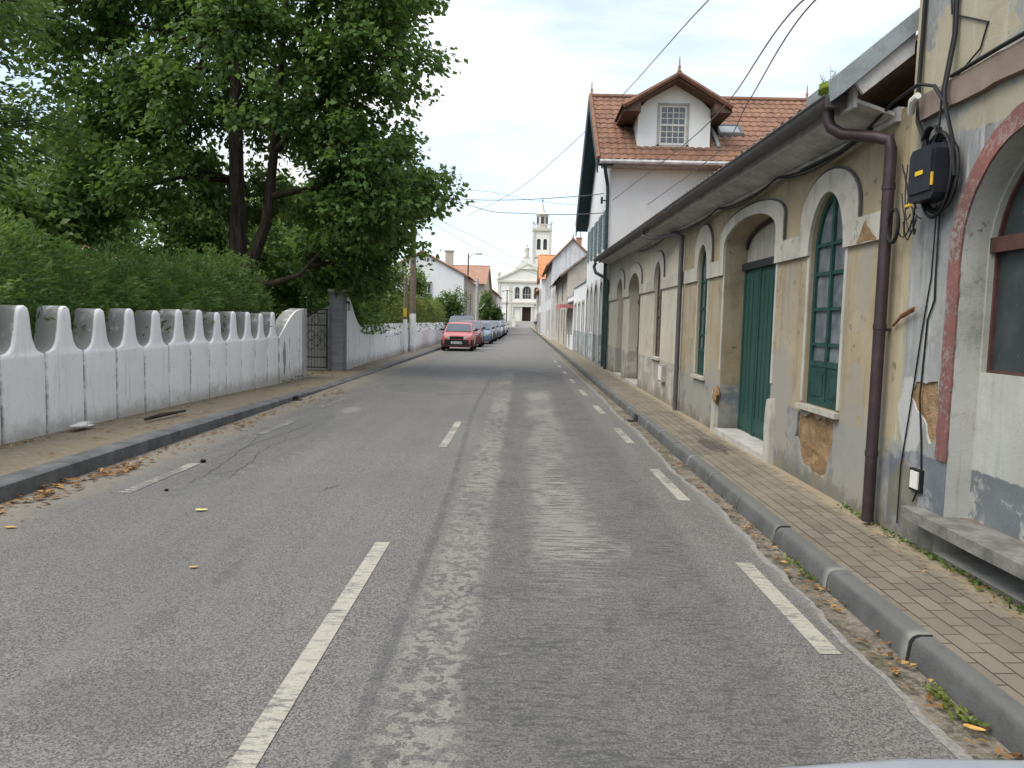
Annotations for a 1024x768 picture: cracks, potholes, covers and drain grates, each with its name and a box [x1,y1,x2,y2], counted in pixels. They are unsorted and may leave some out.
crack [189,425,313,483]
